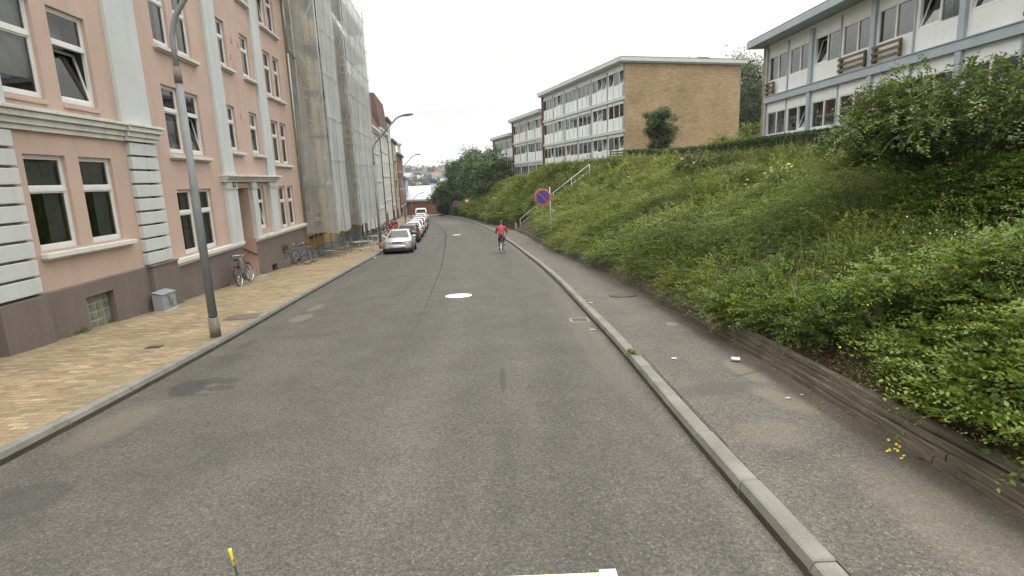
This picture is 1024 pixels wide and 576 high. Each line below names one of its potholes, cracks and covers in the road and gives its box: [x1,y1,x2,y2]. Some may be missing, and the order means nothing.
manhole cover [222,313,262,321]
